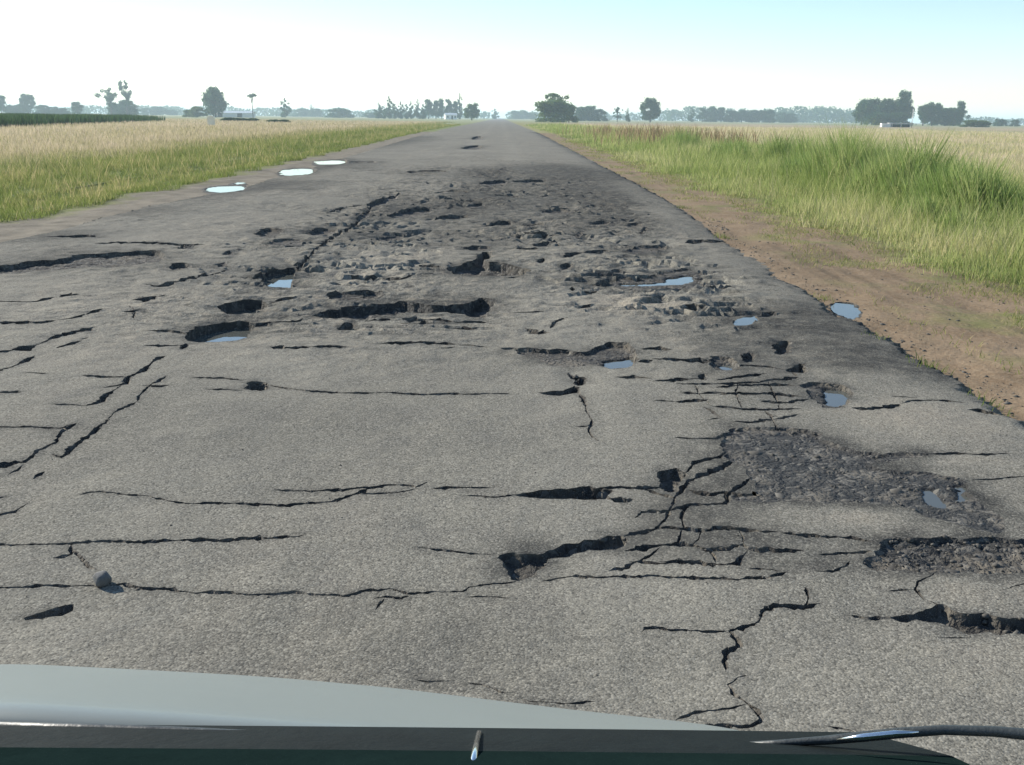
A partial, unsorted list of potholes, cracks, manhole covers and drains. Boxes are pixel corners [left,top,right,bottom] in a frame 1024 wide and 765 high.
pothole [863,536,1024,574]
crack [366,283,597,350]
pothole [720,427,1005,533]
crack [255,297,303,327]
pothole [275,168,317,177]
crack [0,497,28,516]
crack [852,396,1005,416]
pothole [828,302,863,320]
crack [890,573,937,606]
pothole [446,252,532,276]
pothole [313,298,496,319]
